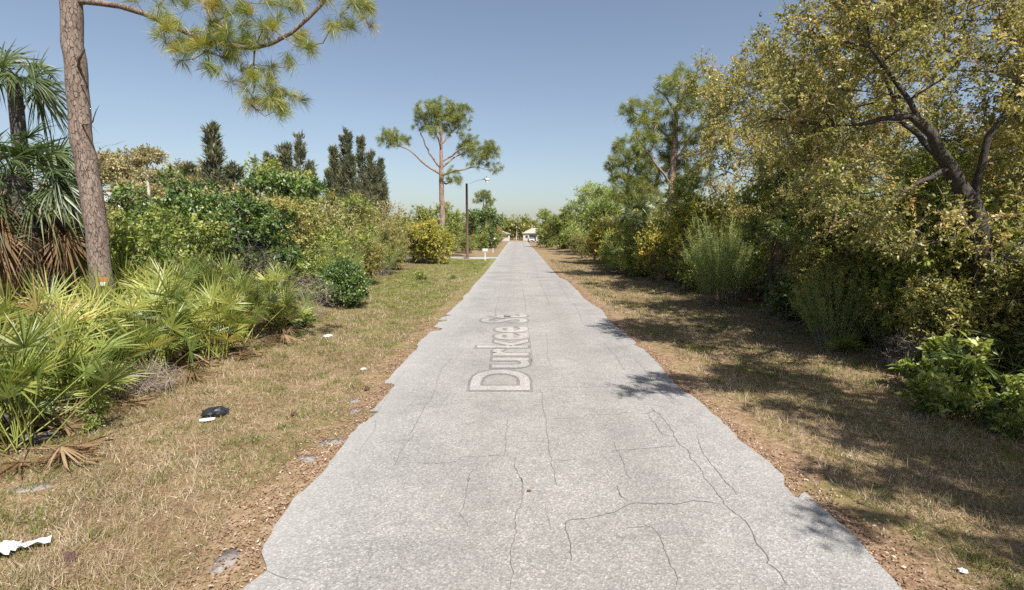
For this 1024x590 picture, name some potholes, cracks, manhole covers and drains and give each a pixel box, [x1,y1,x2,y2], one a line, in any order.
crack [419,420,524,586]
crack [394,358,456,465]
crack [542,366,786,589]
